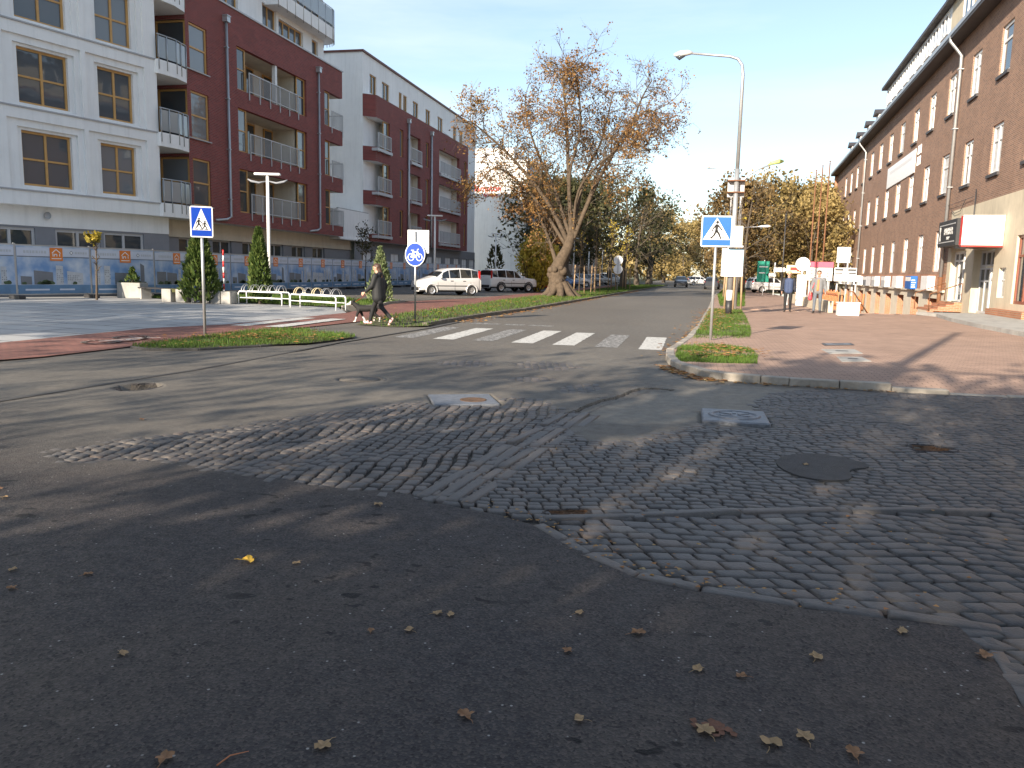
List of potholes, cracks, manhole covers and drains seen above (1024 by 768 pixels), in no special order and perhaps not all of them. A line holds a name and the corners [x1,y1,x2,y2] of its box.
manhole cover [701,408,771,429]
manhole cover [428,394,500,407]
crack [545,386,676,421]
